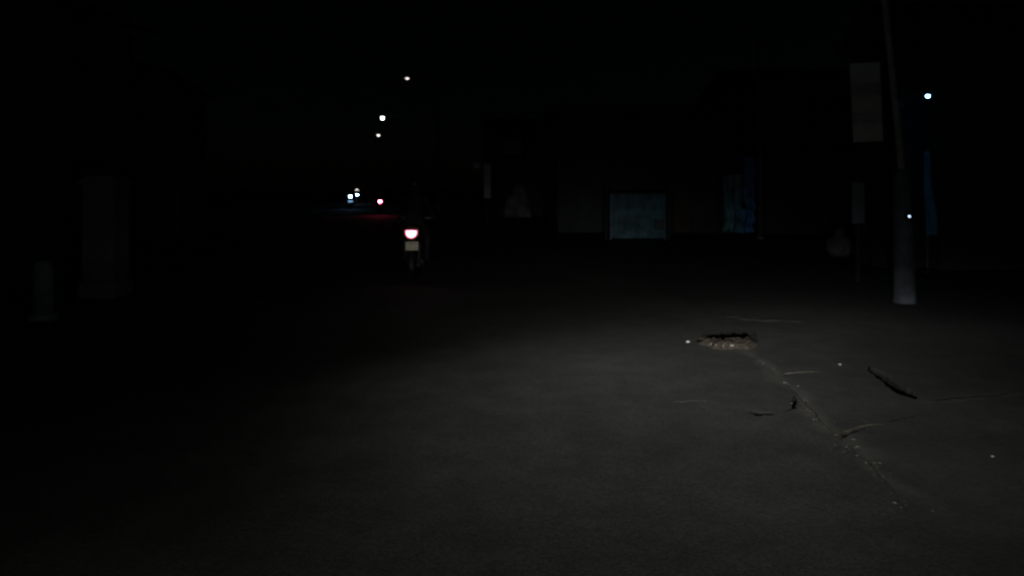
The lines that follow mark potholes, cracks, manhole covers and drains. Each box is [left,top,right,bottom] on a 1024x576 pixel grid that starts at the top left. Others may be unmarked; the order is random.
pothole [694,336,758,351]
crack [868,367,1024,403]
